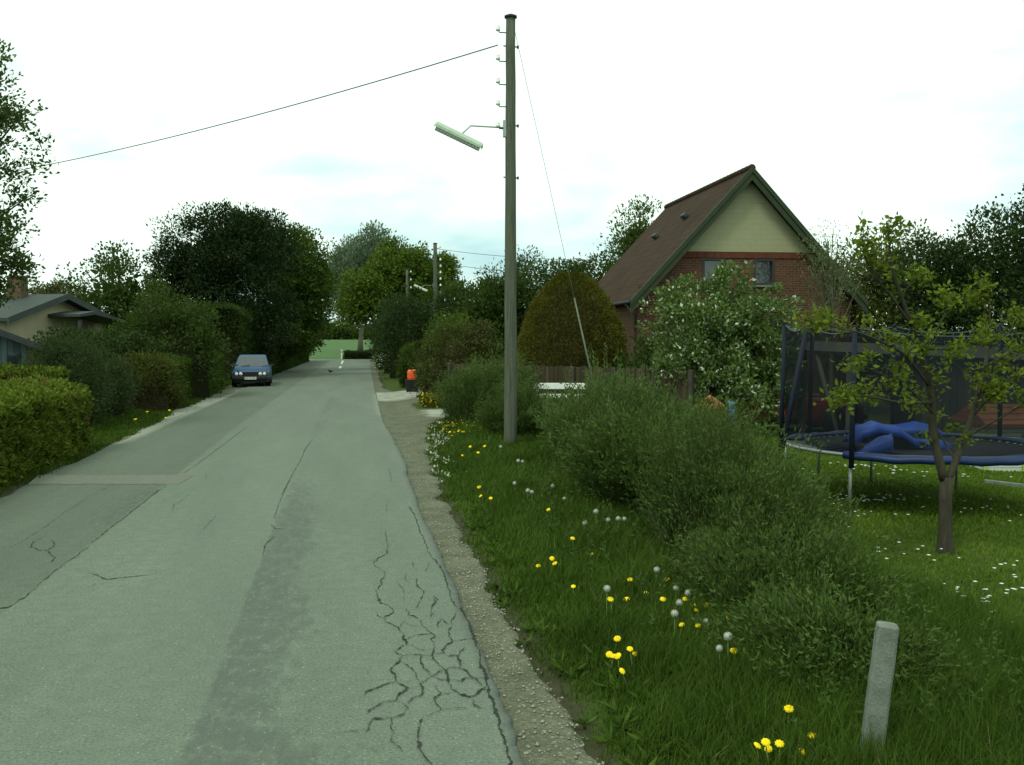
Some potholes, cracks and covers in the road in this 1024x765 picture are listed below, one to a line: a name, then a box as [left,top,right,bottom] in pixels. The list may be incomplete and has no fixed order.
crack [338,507,513,765]
